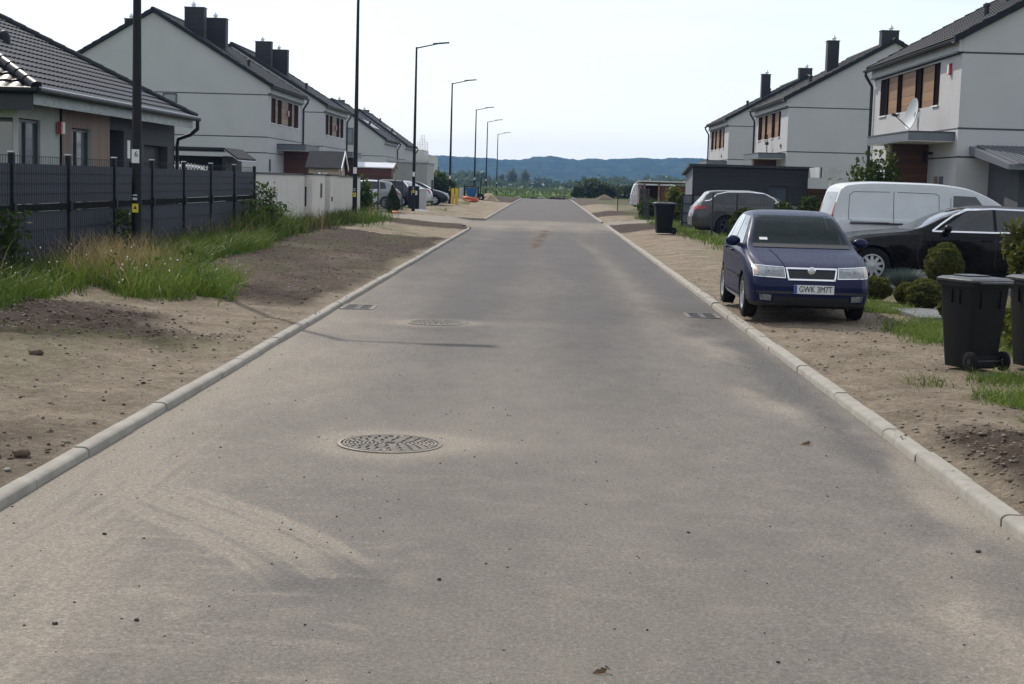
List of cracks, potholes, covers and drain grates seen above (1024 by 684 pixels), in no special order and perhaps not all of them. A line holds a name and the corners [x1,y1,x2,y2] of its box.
manhole cover [337,434,442,454]
